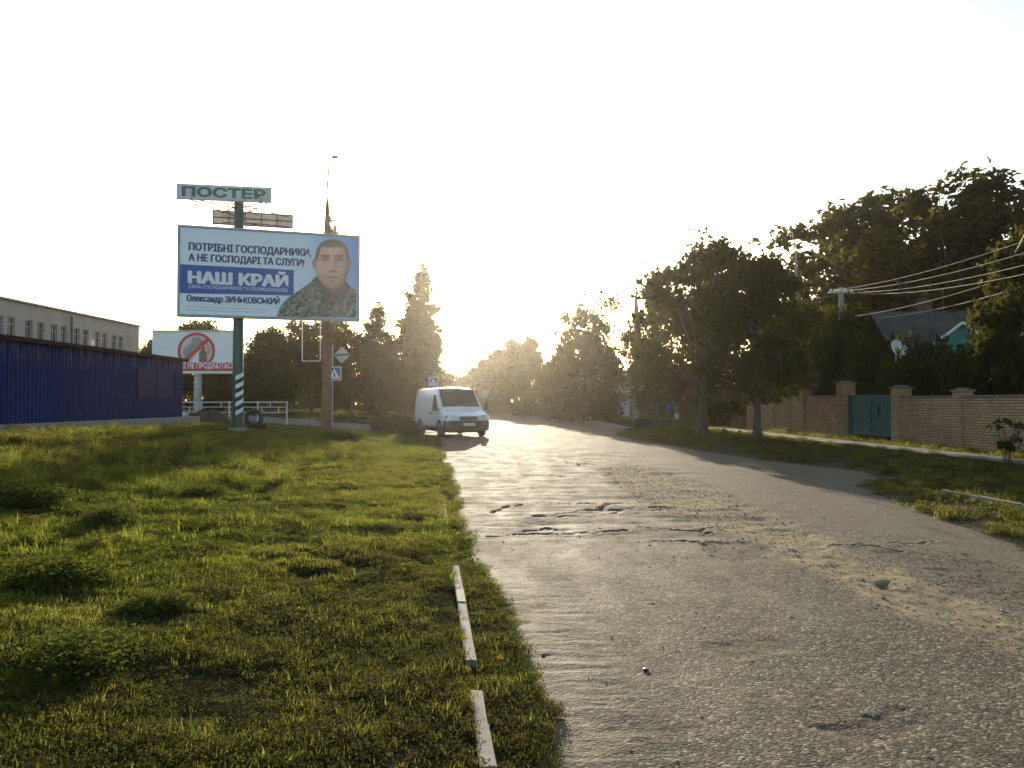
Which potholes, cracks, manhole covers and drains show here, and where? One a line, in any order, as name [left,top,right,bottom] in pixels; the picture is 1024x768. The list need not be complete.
pothole [803,704,949,746]
